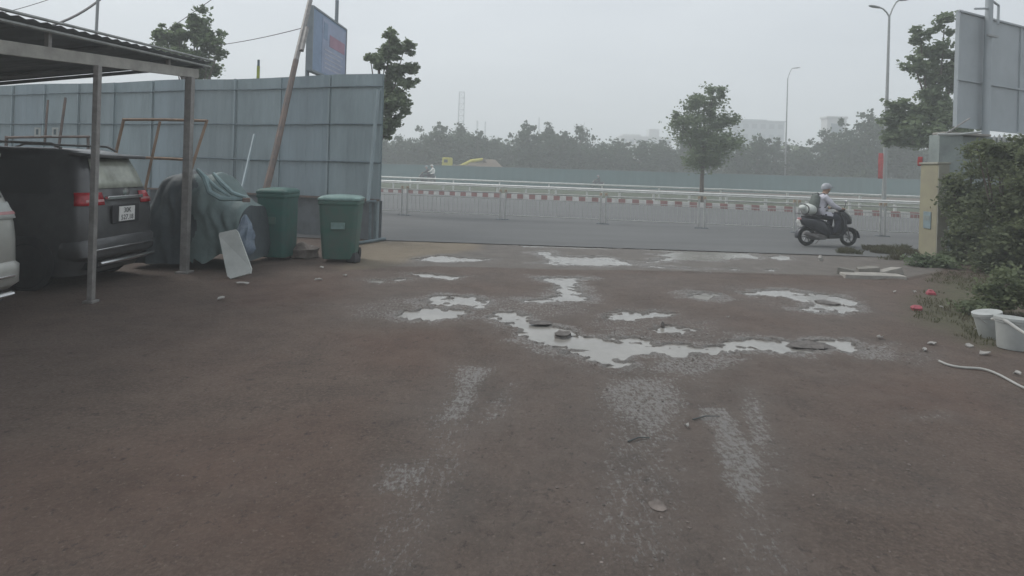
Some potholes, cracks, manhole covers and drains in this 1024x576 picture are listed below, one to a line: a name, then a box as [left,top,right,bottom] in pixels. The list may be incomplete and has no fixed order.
pothole [485,310,865,372]
pothole [408,294,497,311]
pothole [735,288,869,314]
pothole [514,276,594,303]
pothole [408,254,494,263]
pothole [528,250,638,267]
pothole [392,306,474,321]
